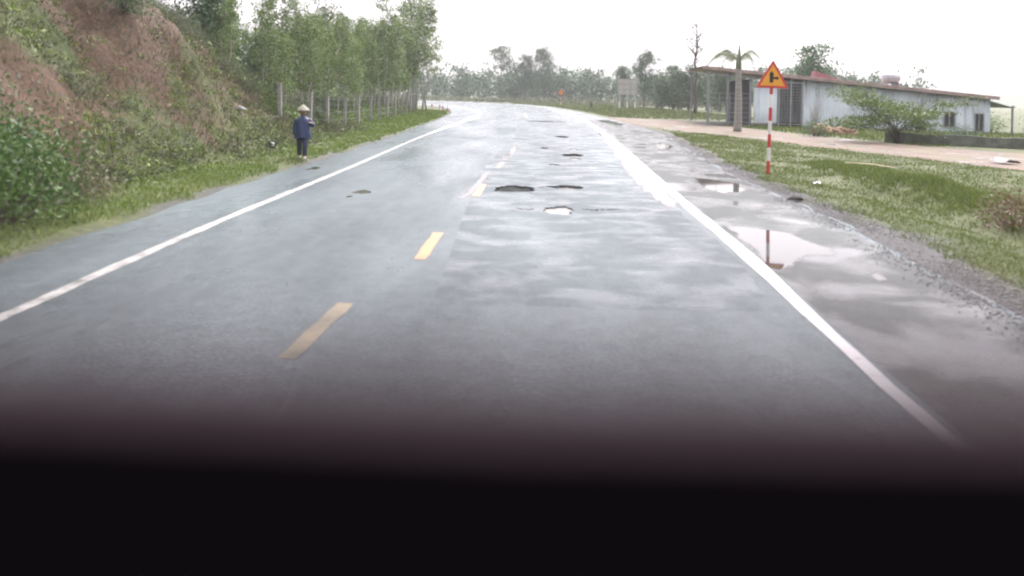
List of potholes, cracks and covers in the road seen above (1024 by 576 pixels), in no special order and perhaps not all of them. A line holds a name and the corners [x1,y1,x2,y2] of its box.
pothole [543,206,574,215]
